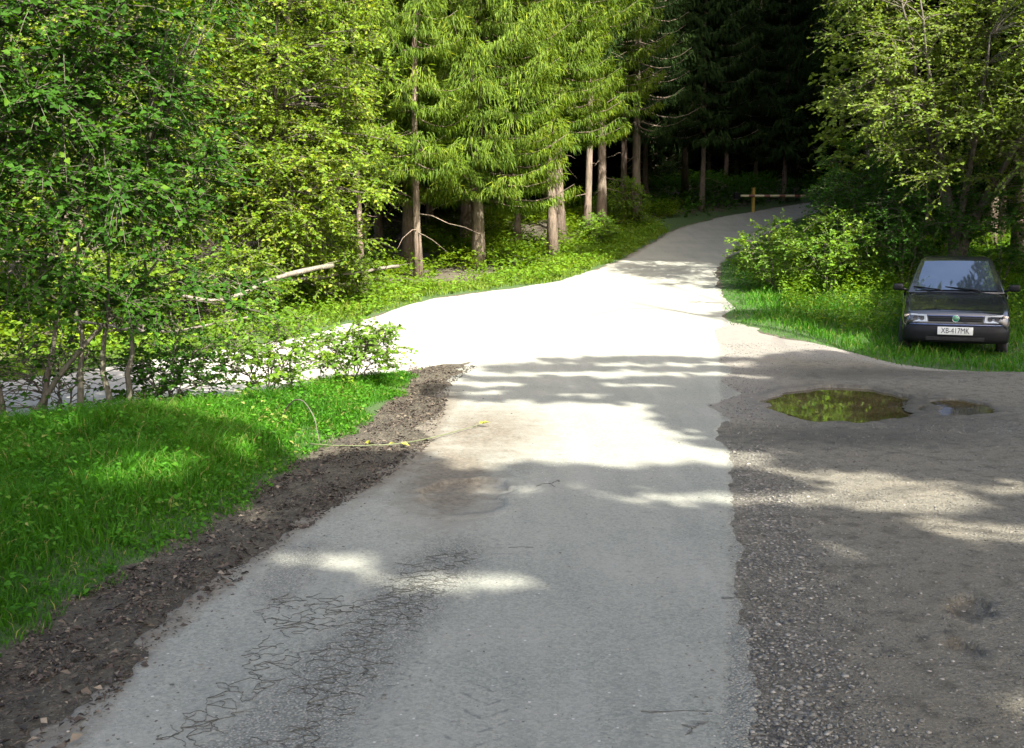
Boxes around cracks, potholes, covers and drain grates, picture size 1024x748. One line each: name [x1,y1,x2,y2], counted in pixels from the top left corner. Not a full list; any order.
pothole [902,396,1012,418]
crack [156,550,476,748]
crack [641,710,713,735]
pothole [745,383,942,425]
pothole [924,589,1020,630]
